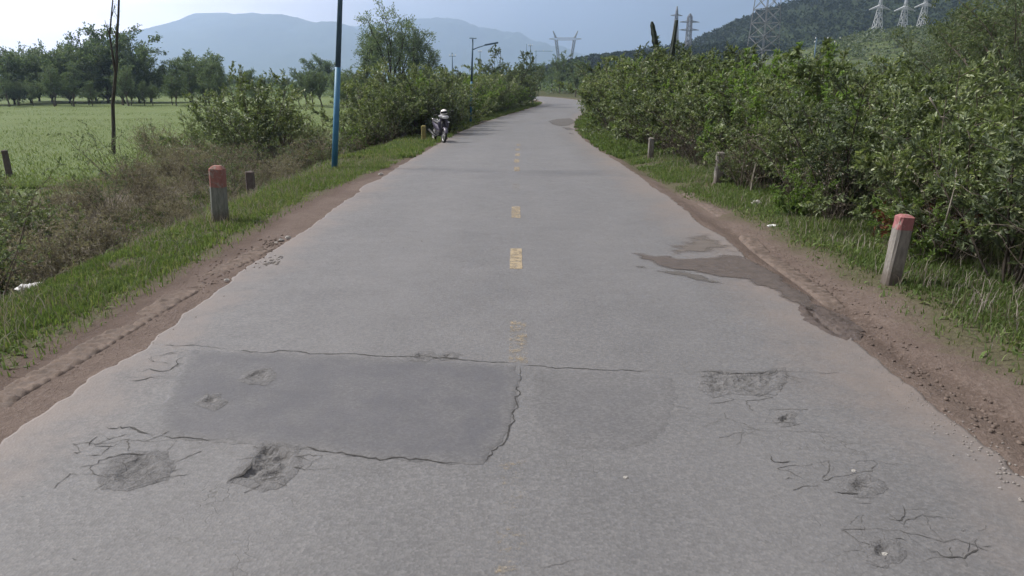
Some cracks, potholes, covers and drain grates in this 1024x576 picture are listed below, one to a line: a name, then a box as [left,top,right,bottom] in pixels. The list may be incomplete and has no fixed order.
crack [54,426,450,493]
pothole [697,367,790,398]
pothole [227,440,304,493]
crack [770,453,987,562]
pothole [837,473,888,498]
crack [129,344,510,381]
pothole [237,367,277,385]
pothole [97,450,176,491]
pothole [858,536,907,568]
pothole [194,393,228,411]
